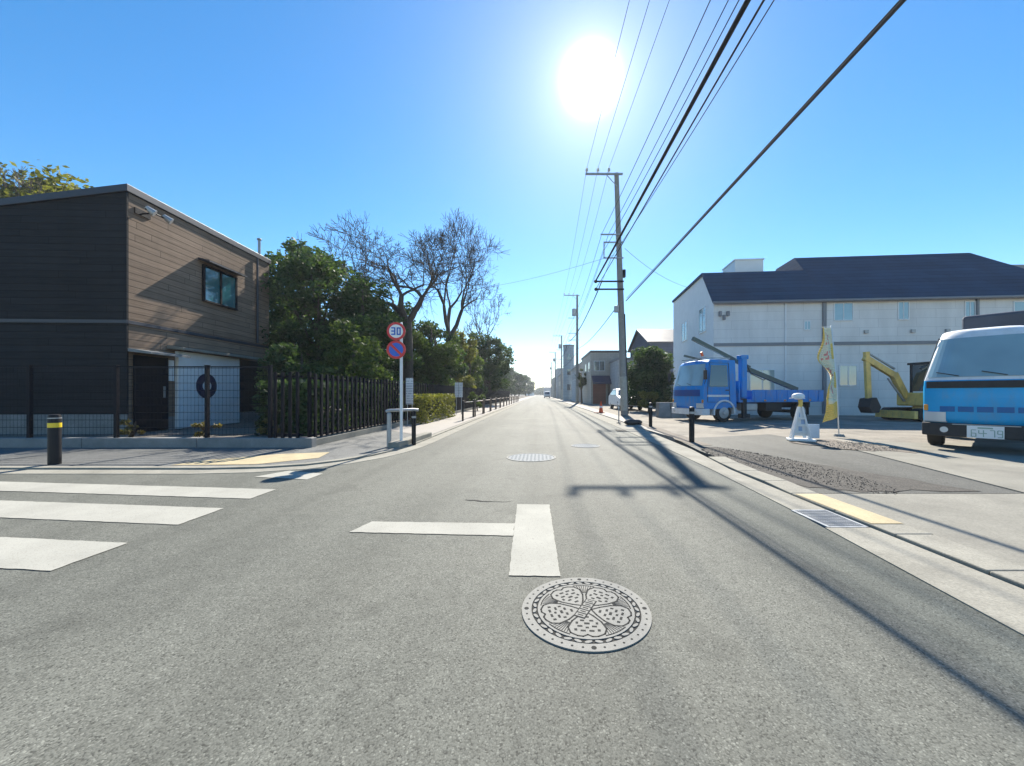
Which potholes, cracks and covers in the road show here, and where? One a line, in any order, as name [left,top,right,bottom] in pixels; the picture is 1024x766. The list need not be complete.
manhole cover [522,577,652,653]
drain grate [791,510,869,528]
manhole cover [506,453,556,462]
